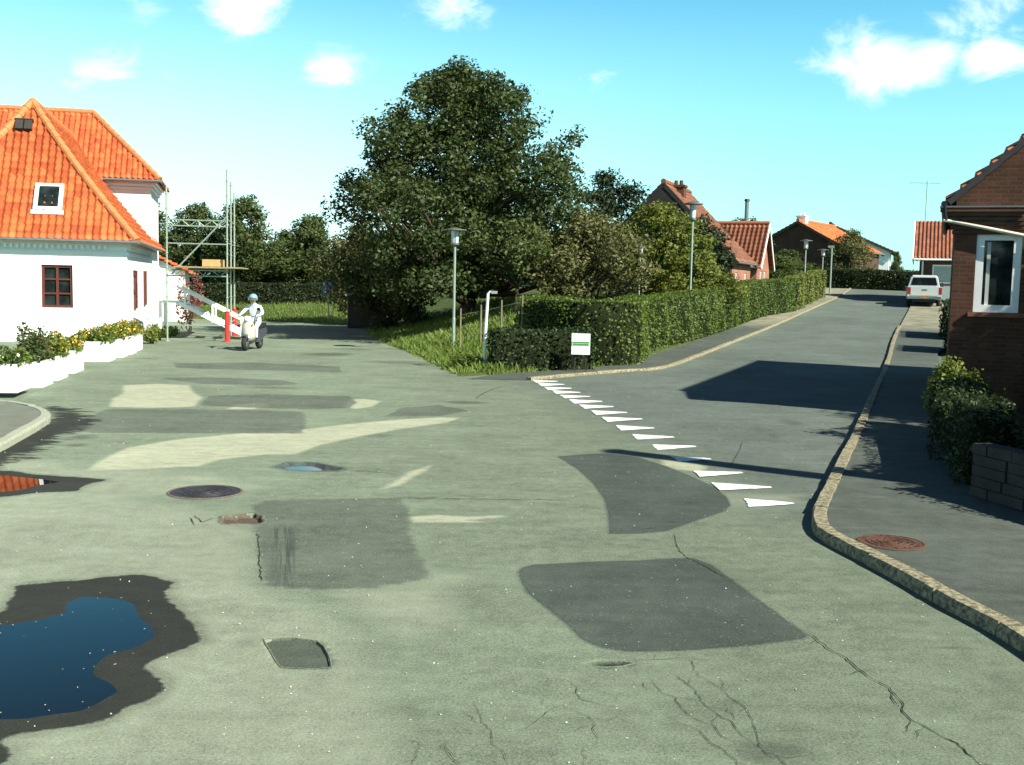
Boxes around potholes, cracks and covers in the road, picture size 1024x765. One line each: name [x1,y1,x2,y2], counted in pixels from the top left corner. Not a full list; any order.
crack [401,680,624,765]
manhole cover [166,485,244,499]
pothole [263,637,333,669]
pothole [217,512,267,525]
pothole [585,660,638,668]
pothole [271,462,346,471]
crack [808,631,988,765]
manhole cover [856,534,926,551]
